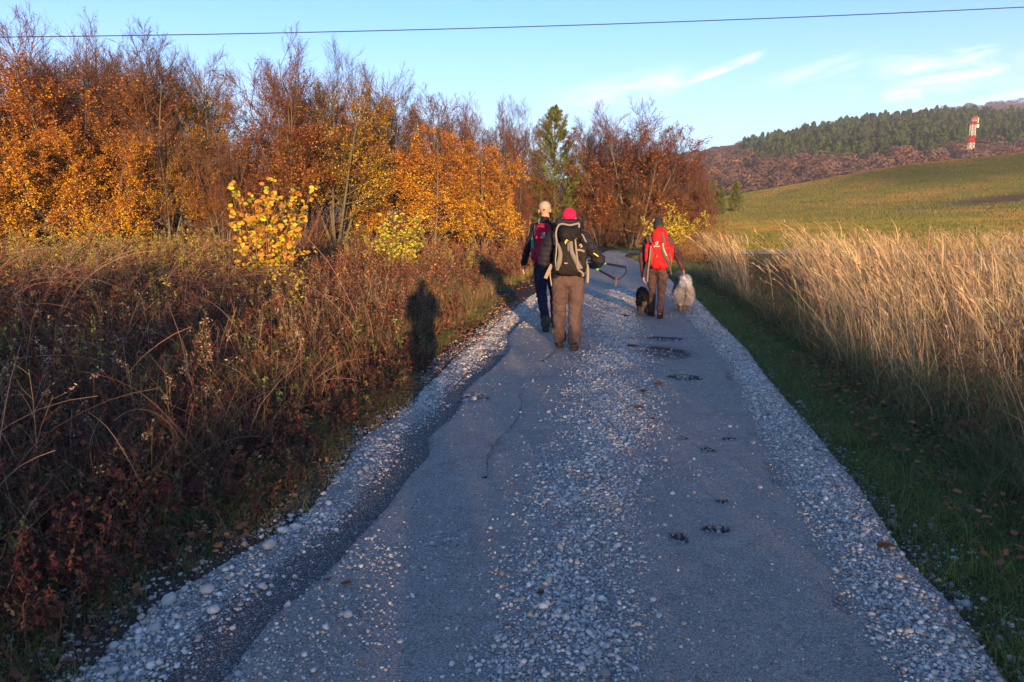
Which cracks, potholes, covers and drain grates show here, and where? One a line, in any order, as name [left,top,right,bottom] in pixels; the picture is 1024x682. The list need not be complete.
pothole [639,345,699,359]
crack [482,394,526,478]
pothole [665,532,690,546]
pothole [699,524,732,535]
pothole [455,392,490,404]
